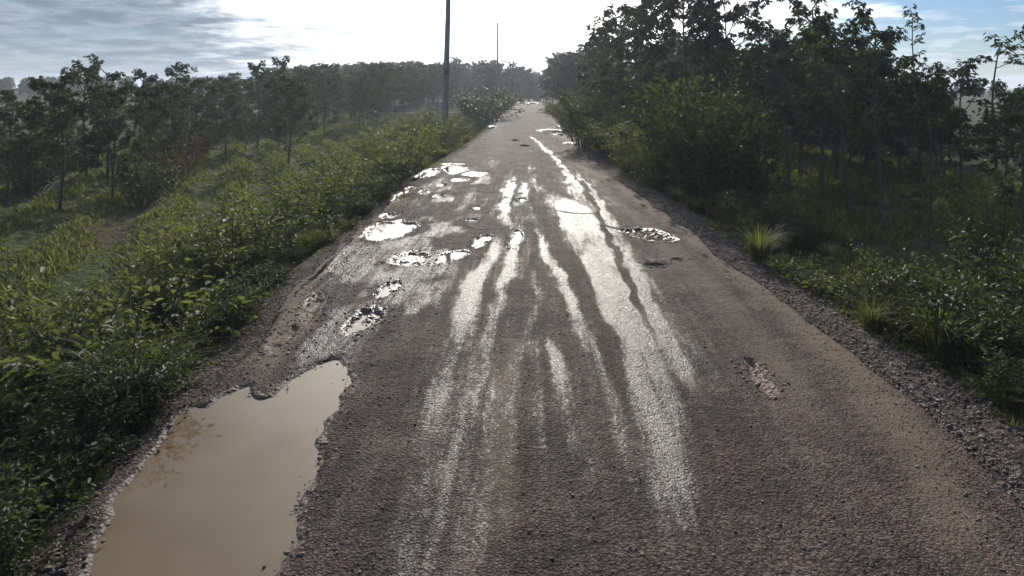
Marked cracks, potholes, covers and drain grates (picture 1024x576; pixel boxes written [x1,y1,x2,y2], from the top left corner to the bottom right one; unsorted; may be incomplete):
pothole [610,225,687,244]
pothole [738,354,786,399]
pothole [439,165,472,175]
pothole [382,248,438,268]
pothole [410,168,444,179]
pothole [64,351,369,576]
pothole [334,302,395,338]
pothole [421,248,476,267]
pothole [353,218,427,243]
pothole [367,278,408,300]
